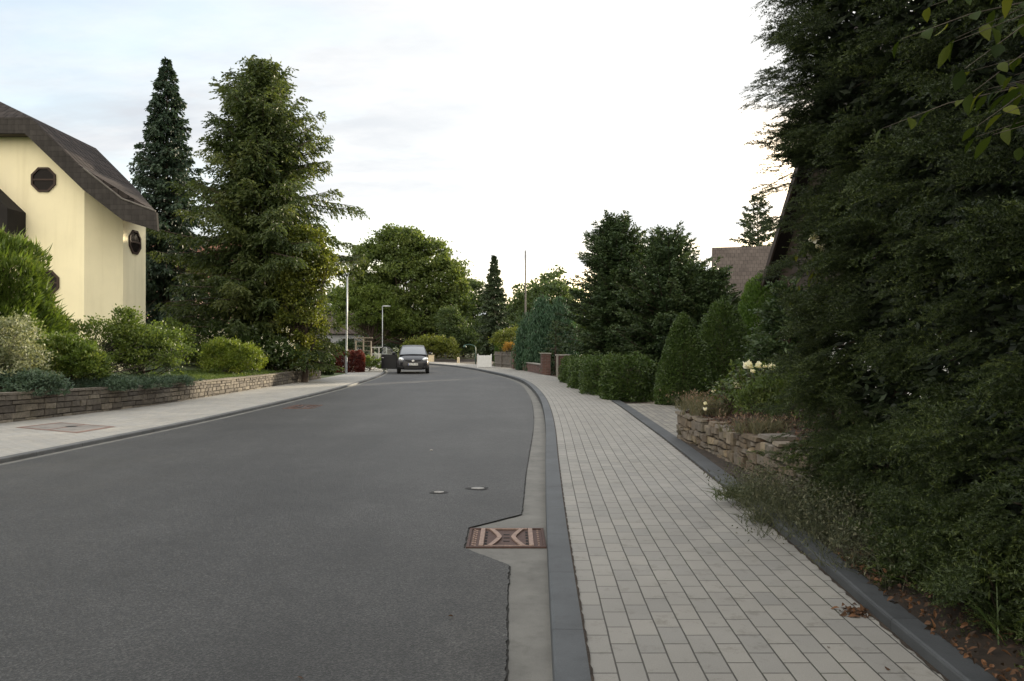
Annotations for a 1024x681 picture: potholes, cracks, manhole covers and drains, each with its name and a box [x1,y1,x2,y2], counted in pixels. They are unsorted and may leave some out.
drain grate [466,528,547,548]
manhole cover [17,422,115,433]
